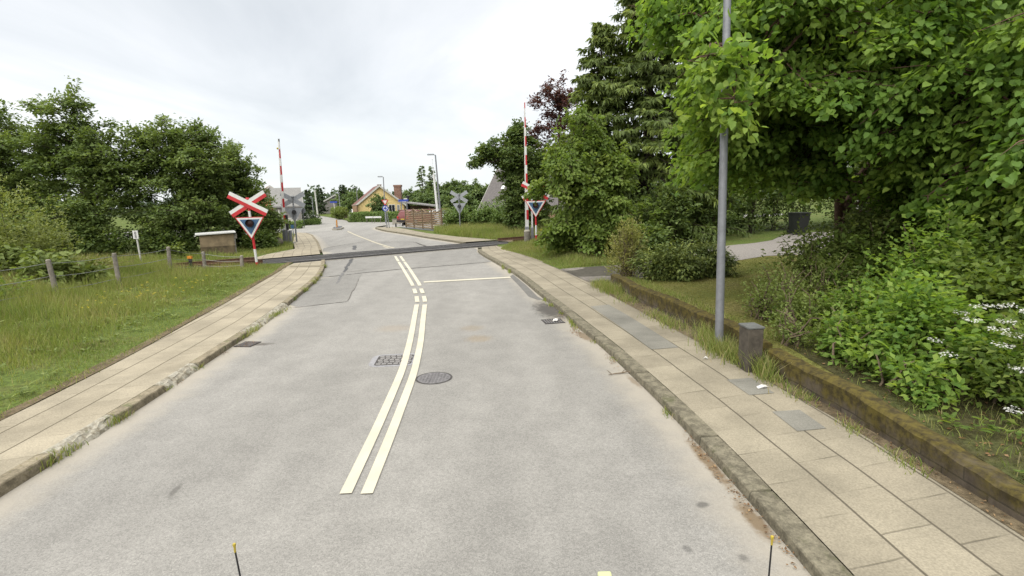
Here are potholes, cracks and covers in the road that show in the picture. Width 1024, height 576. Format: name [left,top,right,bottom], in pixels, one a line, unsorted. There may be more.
manhole cover [415,372,453,384]
